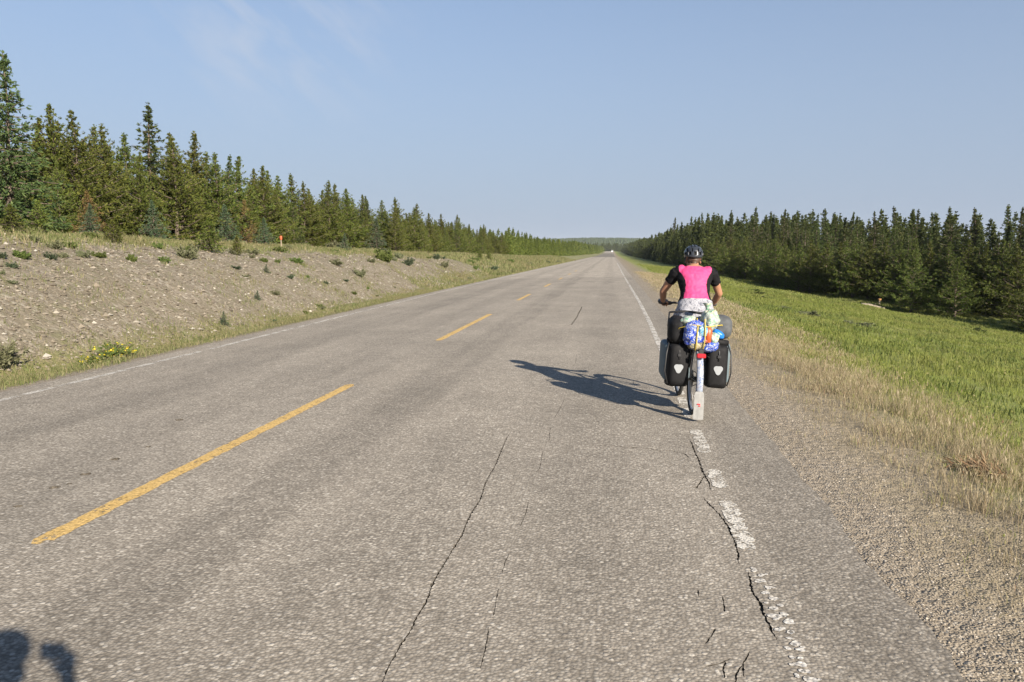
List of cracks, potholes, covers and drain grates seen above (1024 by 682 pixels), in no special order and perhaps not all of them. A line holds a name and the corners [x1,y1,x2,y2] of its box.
crack [382,435,509,682]
crack [602,441,777,682]
crack [480,355,577,669]
